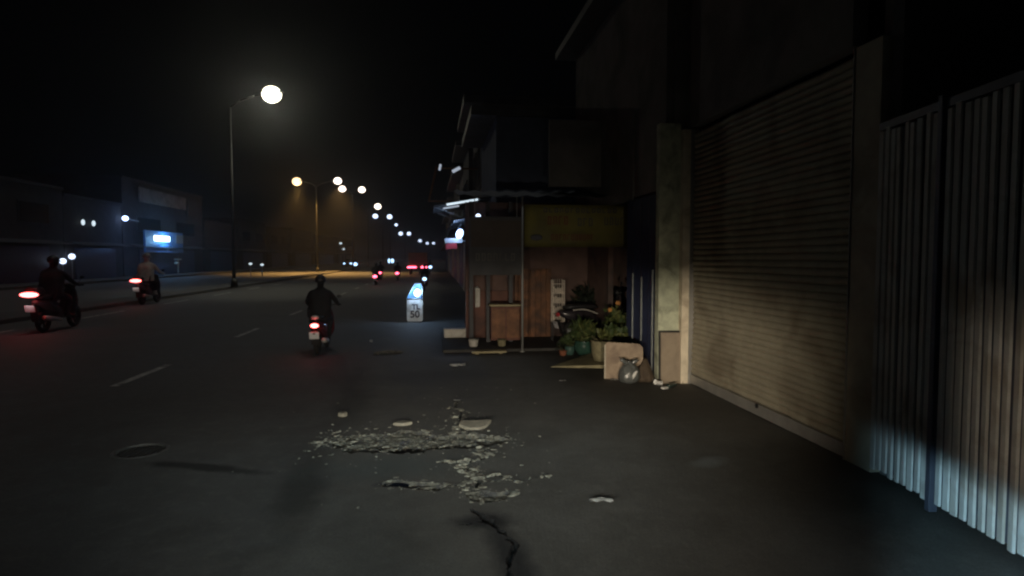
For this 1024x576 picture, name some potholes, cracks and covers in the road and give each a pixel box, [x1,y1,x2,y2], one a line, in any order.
crack [438,401,553,576]
pothole [374,477,455,494]
pothole [318,428,514,457]
manhole cover [109,443,170,459]
pothole [458,487,524,505]
